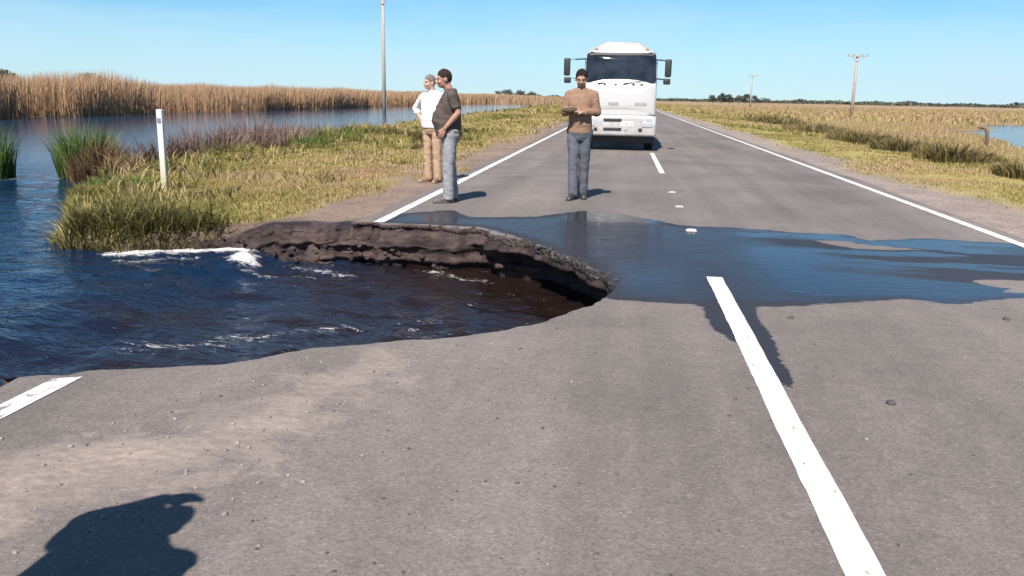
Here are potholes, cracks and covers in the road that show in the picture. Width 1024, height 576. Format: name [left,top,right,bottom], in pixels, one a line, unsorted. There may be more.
pothole [0,221,619,387]
